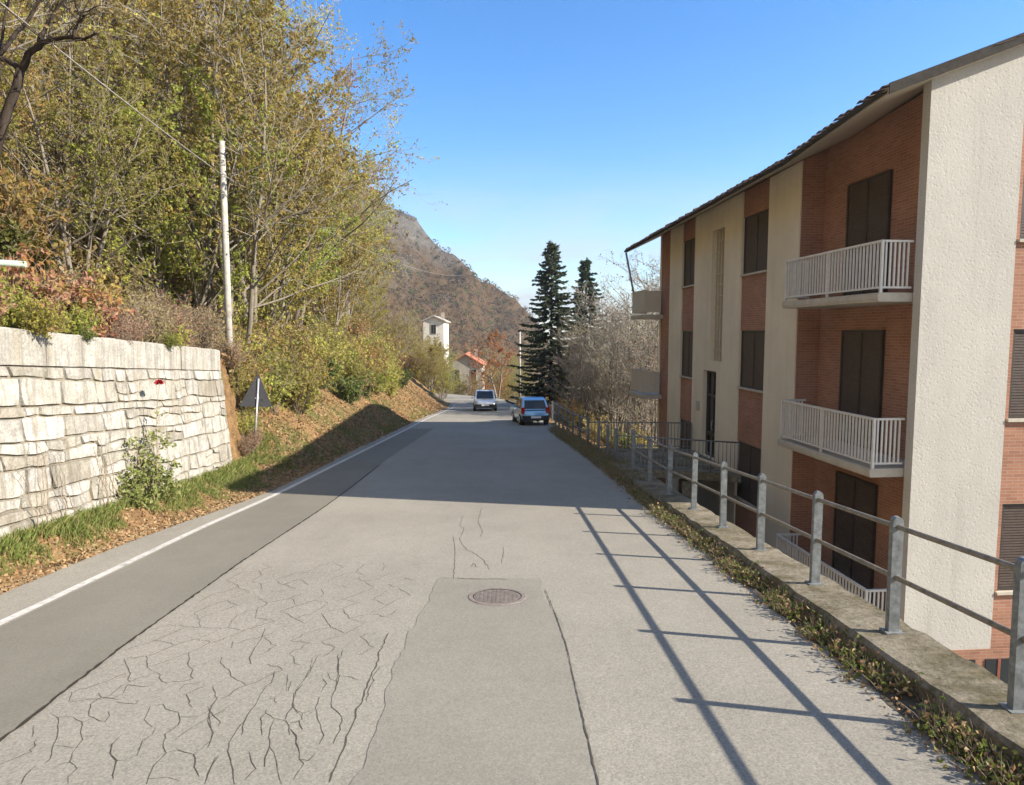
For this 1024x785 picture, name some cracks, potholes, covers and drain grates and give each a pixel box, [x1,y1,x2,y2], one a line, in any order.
crack [453,508,504,578]
manhole cover [468,588,527,606]
crack [1,561,419,784]
